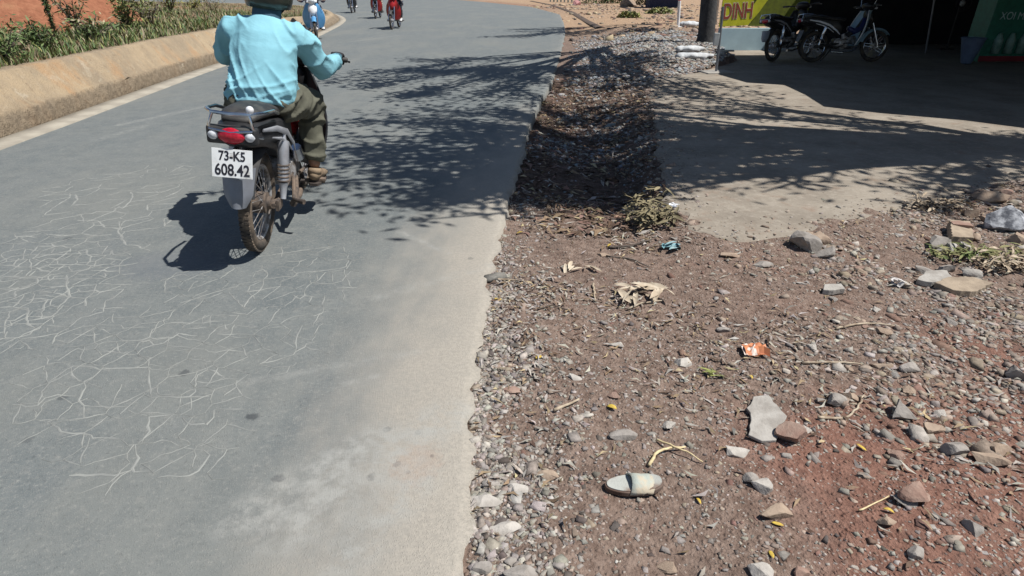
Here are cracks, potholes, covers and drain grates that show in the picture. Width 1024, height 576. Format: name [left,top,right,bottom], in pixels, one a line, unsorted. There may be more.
crack [0,165,358,496]
